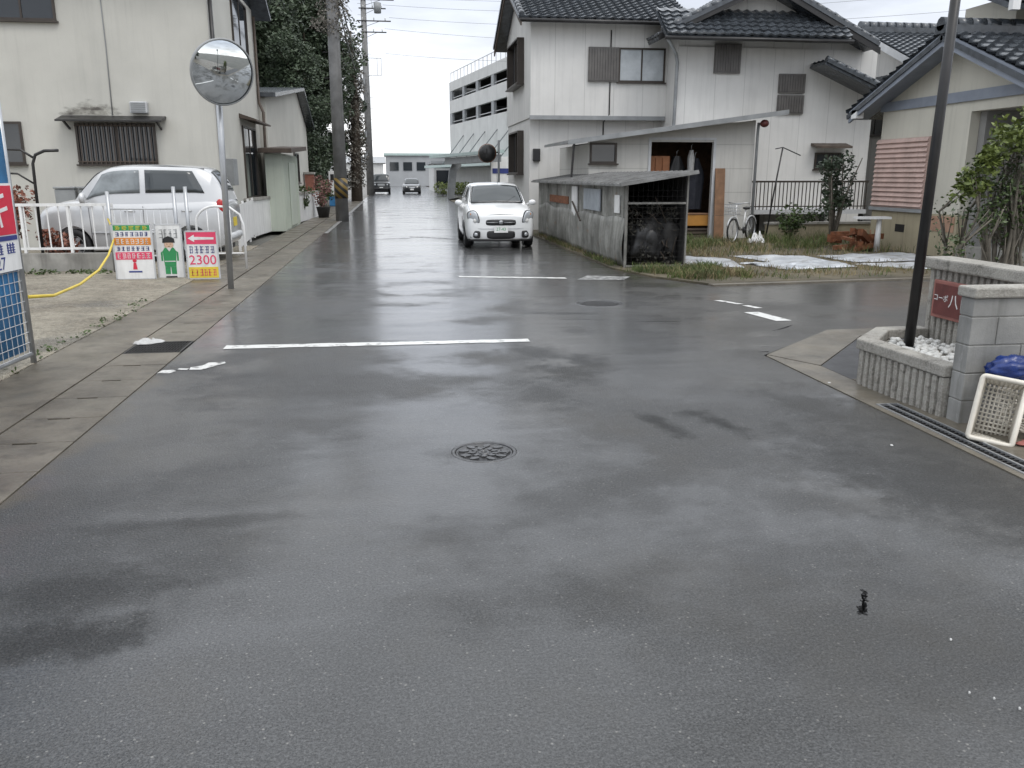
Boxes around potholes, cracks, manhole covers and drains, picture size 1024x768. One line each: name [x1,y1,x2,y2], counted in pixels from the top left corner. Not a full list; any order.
manhole cover [451,441,517,463]
drain grate [122,341,194,354]
